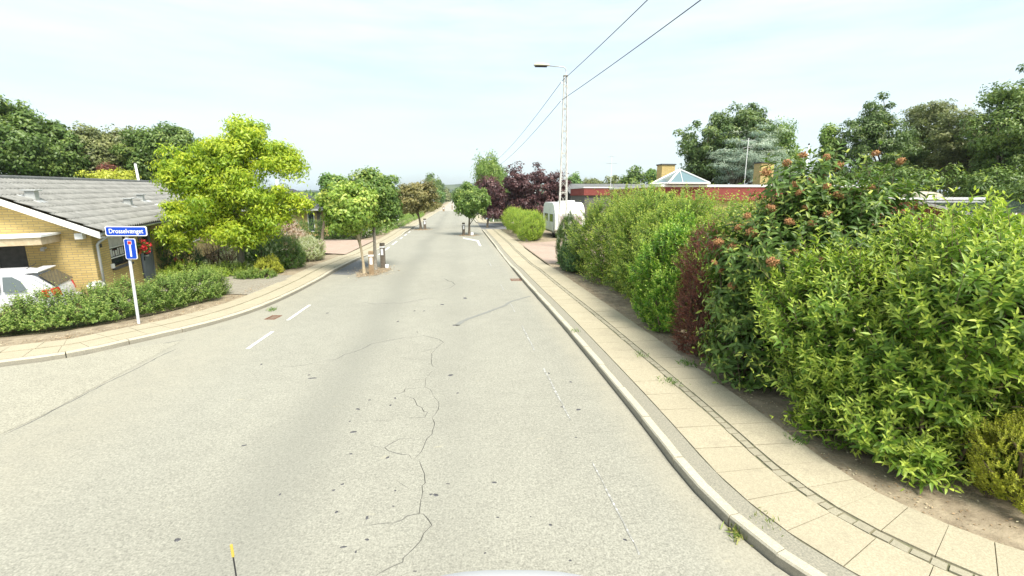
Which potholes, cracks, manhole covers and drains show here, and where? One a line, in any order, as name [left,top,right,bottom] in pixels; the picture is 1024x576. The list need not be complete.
crack [365,335,443,576]
crack [447,280,530,325]
